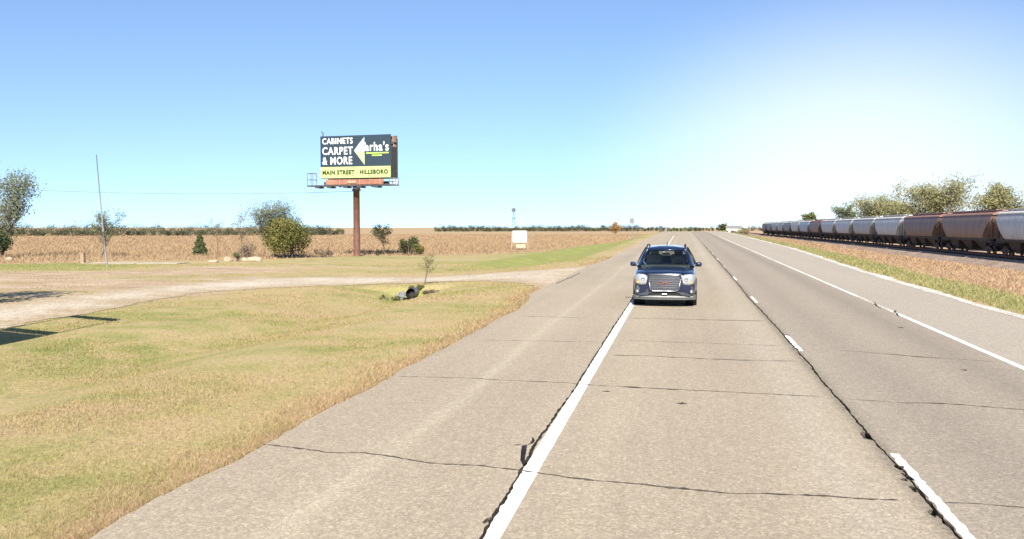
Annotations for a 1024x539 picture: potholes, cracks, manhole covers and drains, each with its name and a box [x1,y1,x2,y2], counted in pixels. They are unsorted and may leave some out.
crack [853,399,1023,410]
crack [844,350,995,362]
crack [263,444,897,500]
